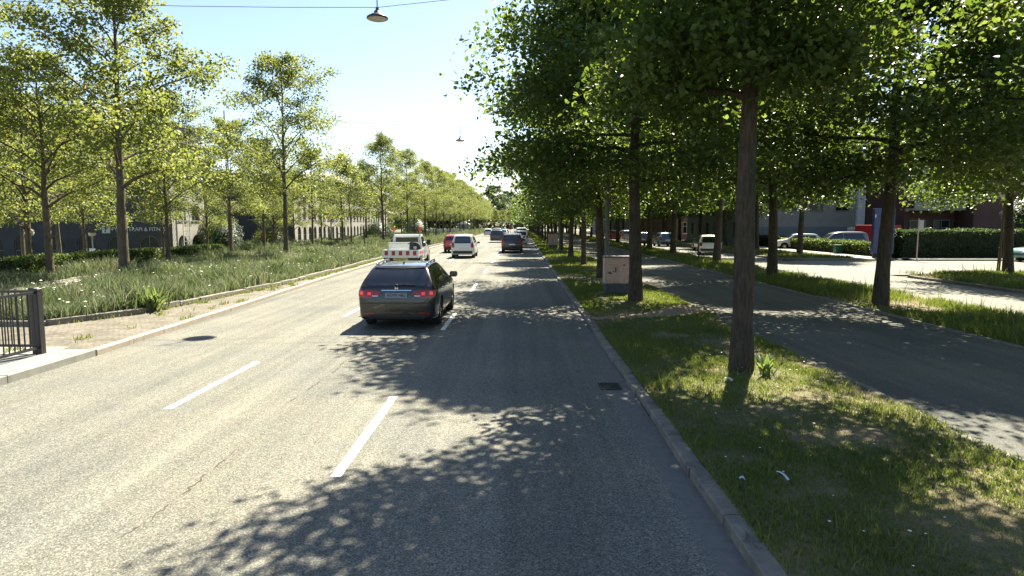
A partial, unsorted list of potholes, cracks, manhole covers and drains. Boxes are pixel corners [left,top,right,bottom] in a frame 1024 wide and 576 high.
drain grate [598,382,622,390]
crack [122,451,234,537]
